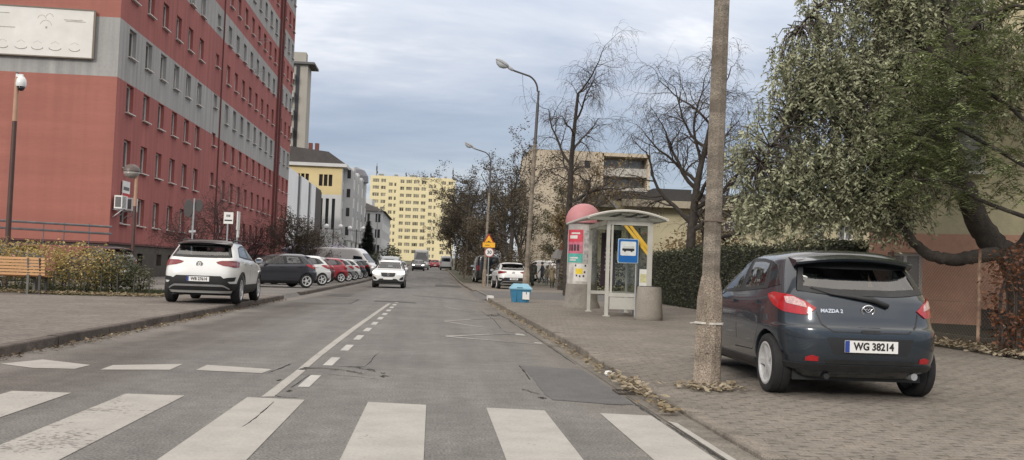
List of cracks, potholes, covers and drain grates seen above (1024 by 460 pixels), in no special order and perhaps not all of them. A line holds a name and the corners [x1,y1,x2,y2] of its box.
crack [483,312,575,394]
crack [268,352,380,379]
crack [242,395,297,427]
